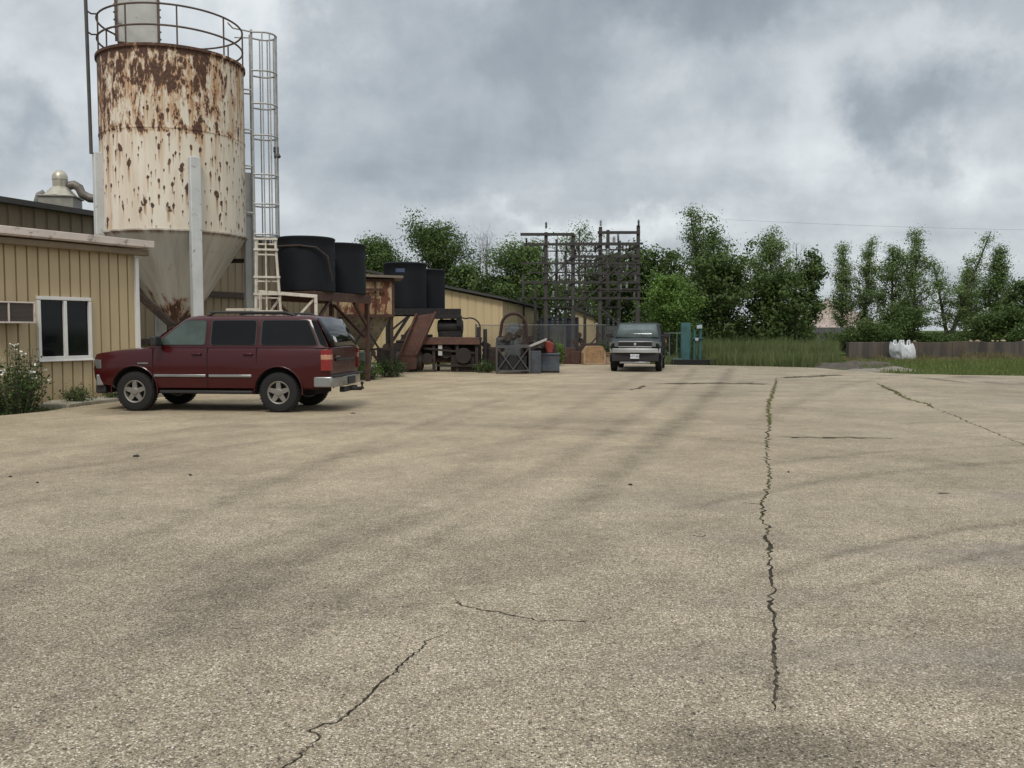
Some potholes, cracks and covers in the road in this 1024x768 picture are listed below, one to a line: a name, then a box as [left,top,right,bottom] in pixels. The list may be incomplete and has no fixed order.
crack [630,374,899,713]
crack [282,631,449,768]
crack [877,383,1024,445]
crack [382,599,616,622]
